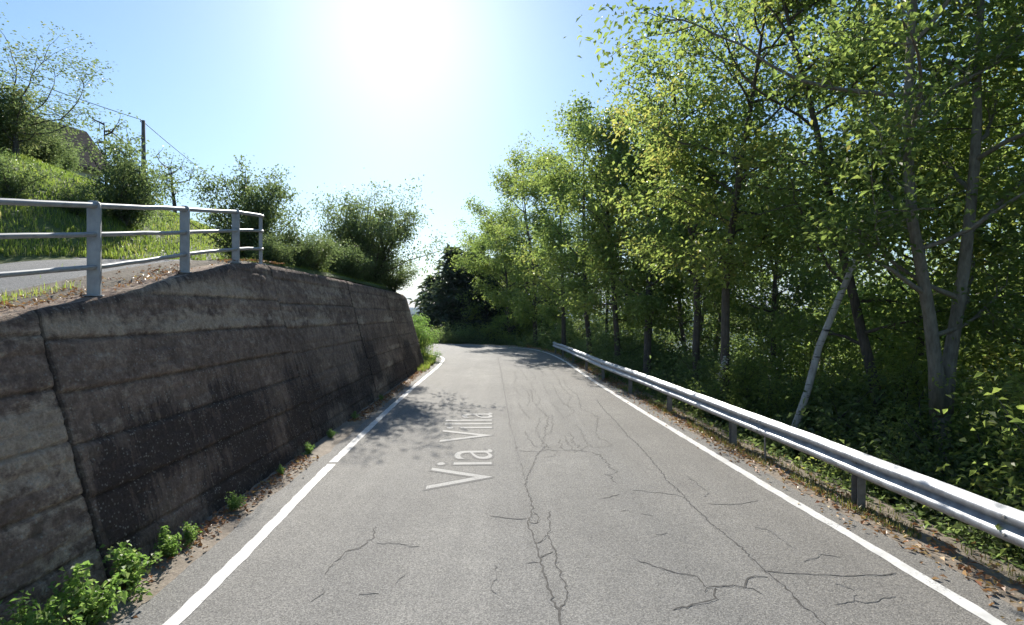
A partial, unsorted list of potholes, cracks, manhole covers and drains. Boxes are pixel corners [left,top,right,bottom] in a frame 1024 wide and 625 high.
crack [310,526,420,602]
crack [493,368,896,625]
